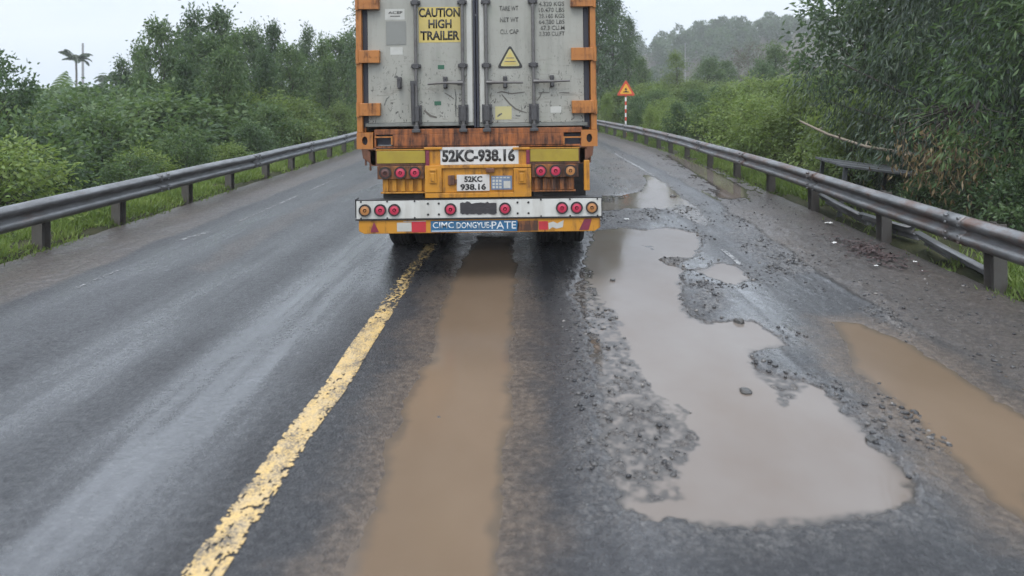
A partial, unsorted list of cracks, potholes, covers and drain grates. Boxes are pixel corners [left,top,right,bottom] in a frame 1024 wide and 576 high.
pothole [586,172,714,226]
pothole [565,225,930,535]
